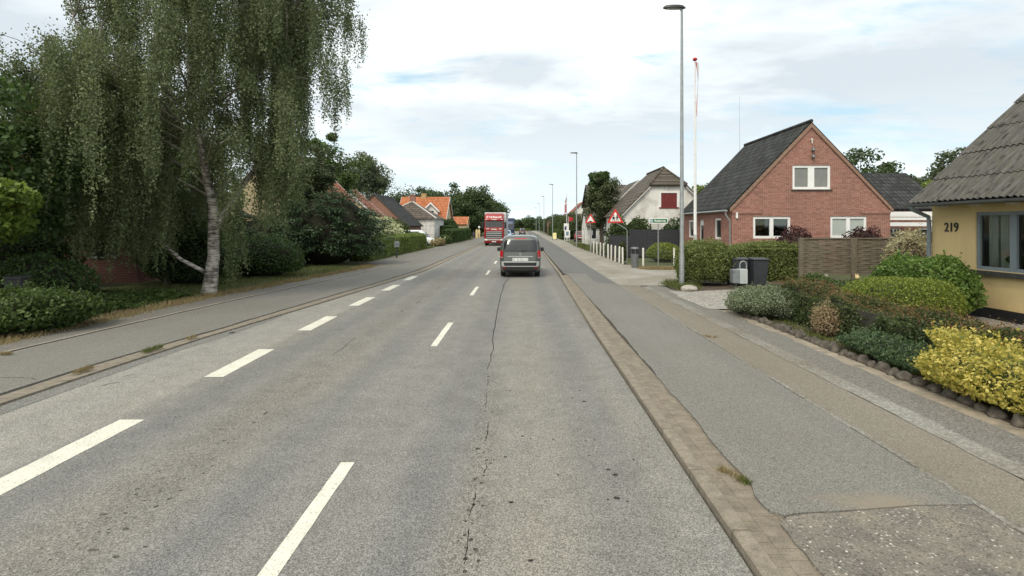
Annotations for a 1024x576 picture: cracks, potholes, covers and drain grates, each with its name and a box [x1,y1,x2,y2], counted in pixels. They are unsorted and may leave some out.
crack [457,277,509,573]
